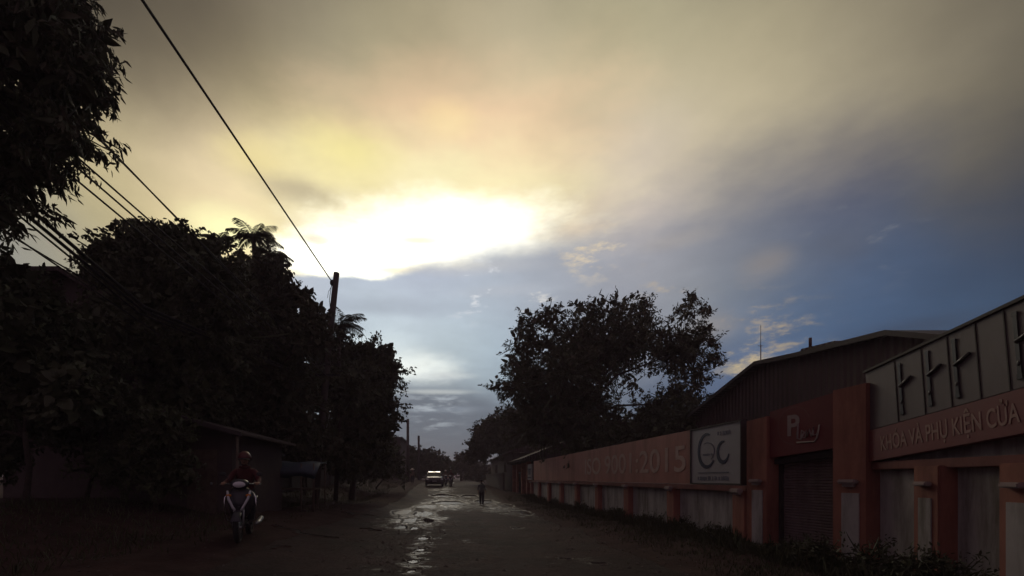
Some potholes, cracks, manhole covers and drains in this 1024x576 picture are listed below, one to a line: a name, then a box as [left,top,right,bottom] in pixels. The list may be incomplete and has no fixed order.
pothole [389,508,415,516]
